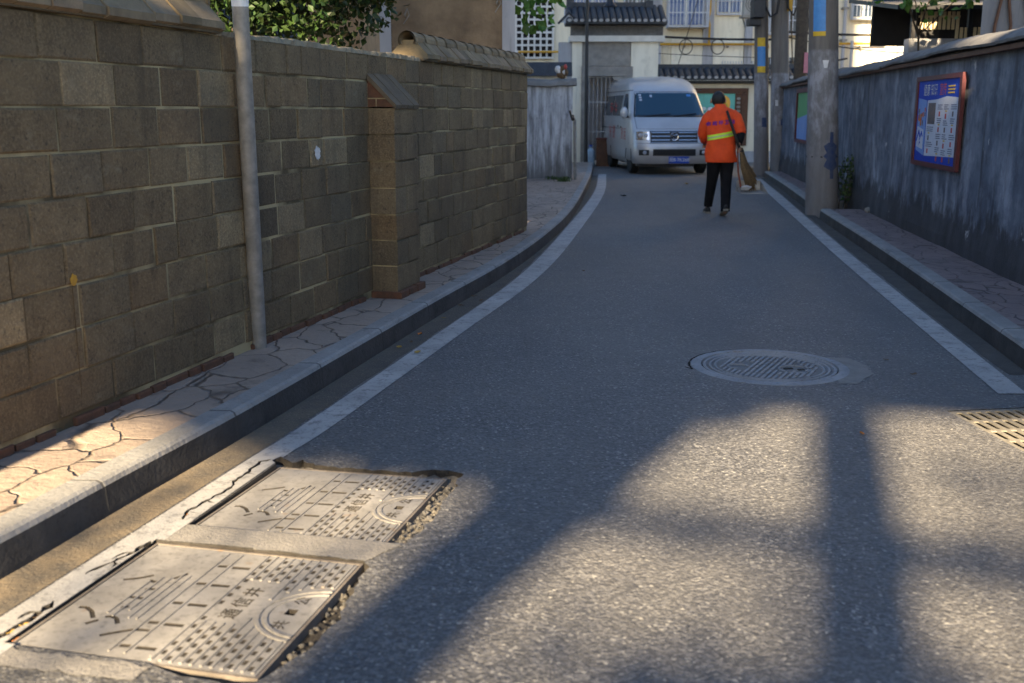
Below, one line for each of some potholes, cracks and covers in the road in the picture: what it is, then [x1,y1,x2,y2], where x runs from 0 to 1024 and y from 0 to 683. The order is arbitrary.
manhole cover [196,467,448,543]
manhole cover [691,349,850,386]
crack [182,460,269,519]
drain grate [948,408,1024,451]
crack [88,542,151,573]
manhole cover [11,543,364,683]
crack [0,603,53,638]
